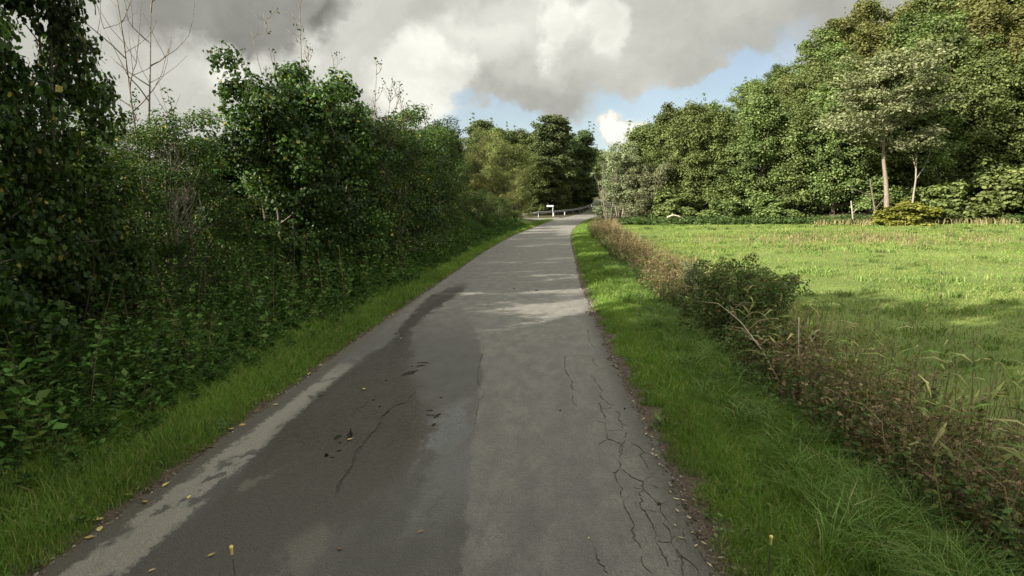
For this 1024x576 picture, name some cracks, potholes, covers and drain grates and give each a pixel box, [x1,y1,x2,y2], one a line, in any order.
crack [583,331,699,576]
crack [335,392,416,495]
